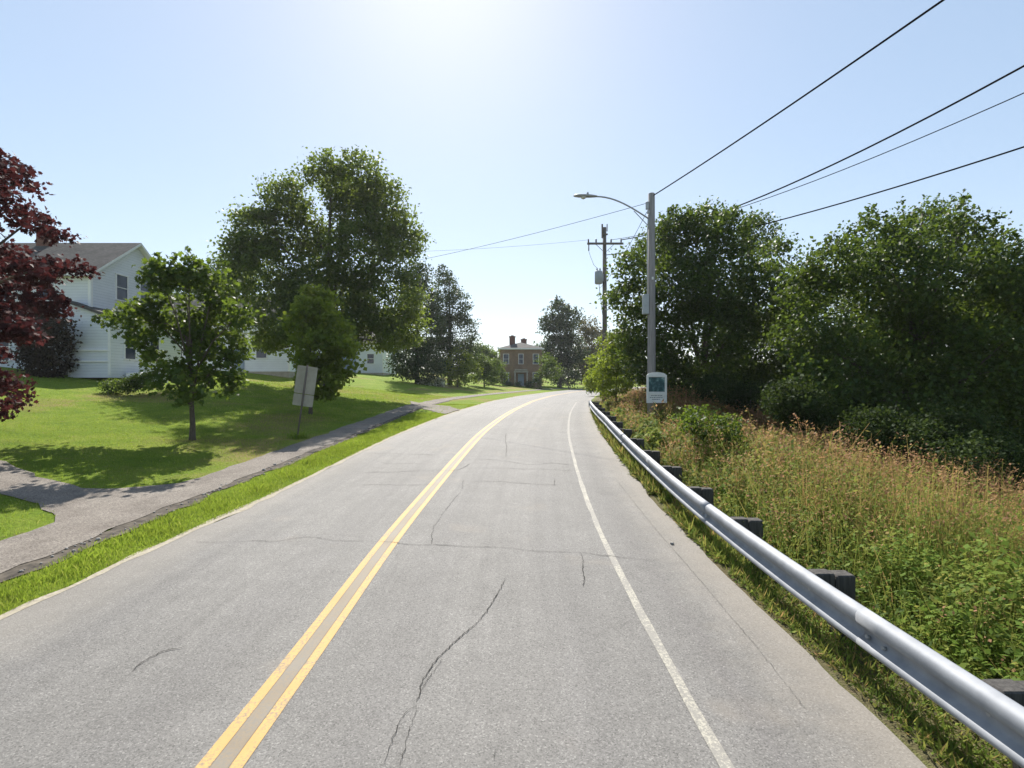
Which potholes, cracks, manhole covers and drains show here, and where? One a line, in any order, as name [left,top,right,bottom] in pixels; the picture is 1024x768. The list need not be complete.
crack [197,453,645,586]
crack [381,577,506,767]
